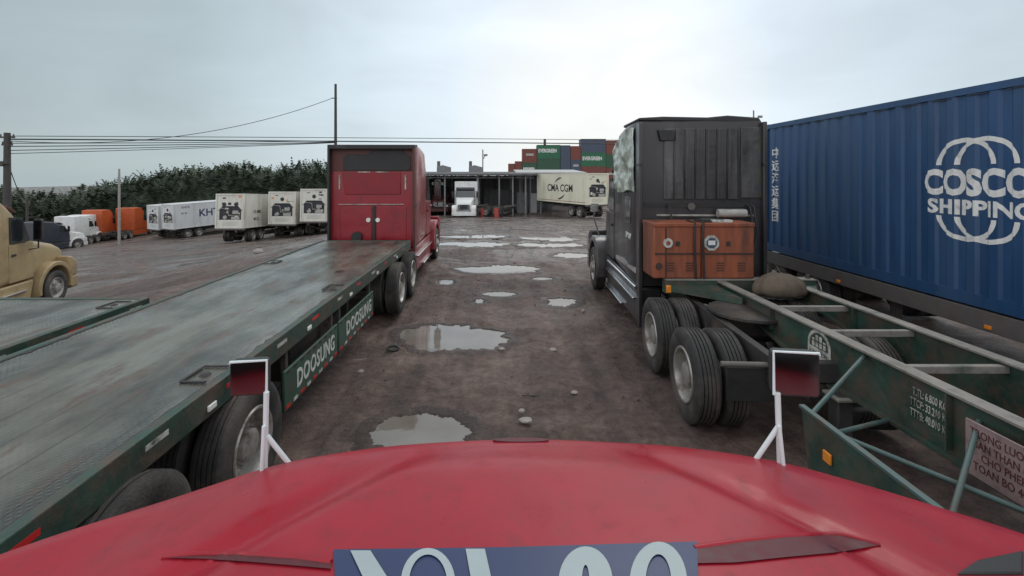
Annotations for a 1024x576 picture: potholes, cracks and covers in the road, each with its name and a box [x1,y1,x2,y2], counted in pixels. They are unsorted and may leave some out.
pothole [348,404,490,451]
pothole [387,321,523,356]
pothole [447,264,547,275]
pothole [537,296,586,310]
pothole [473,290,525,299]
